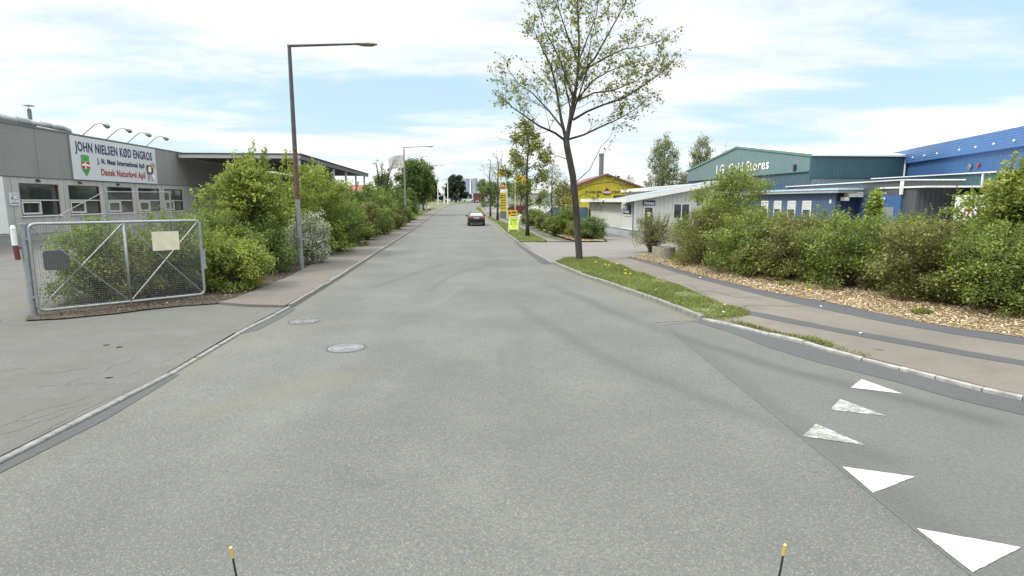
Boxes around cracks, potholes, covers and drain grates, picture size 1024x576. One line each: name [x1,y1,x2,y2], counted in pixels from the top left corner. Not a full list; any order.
crack [0,356,144,440]
manhole cover [325,343,367,353]
